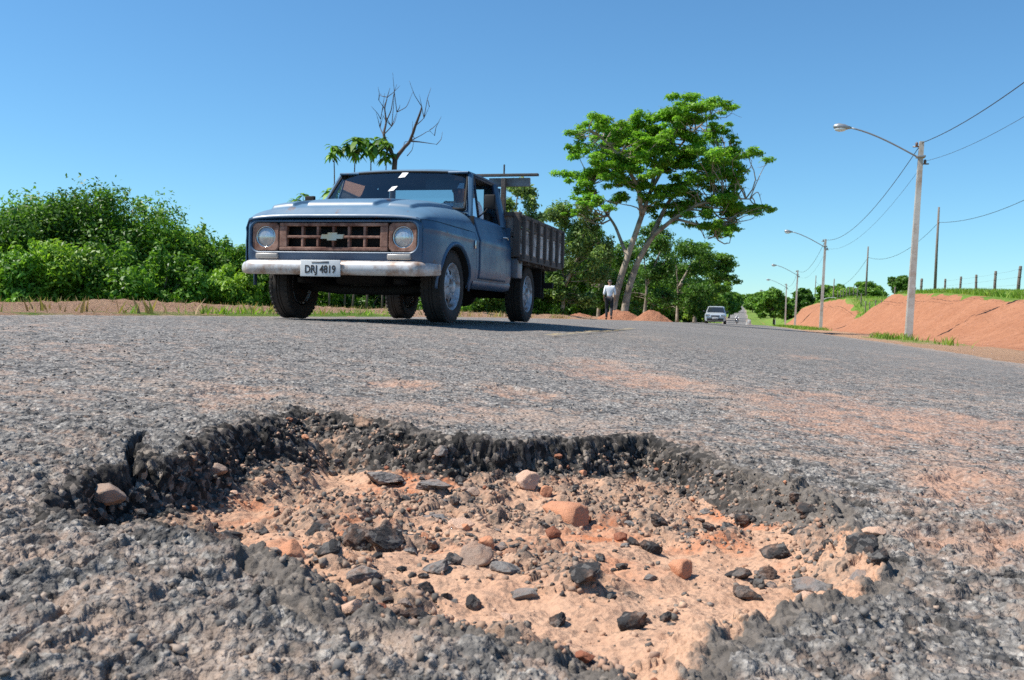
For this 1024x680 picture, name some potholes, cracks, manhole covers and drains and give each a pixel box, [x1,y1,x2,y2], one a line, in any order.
pothole [33,406,910,680]
